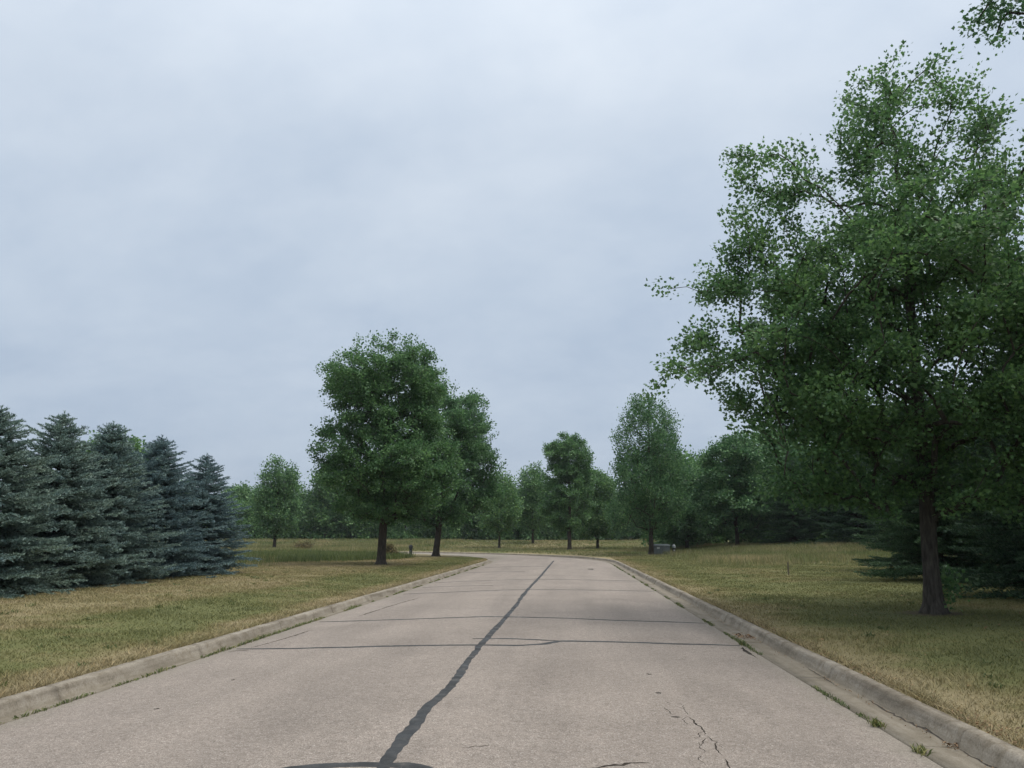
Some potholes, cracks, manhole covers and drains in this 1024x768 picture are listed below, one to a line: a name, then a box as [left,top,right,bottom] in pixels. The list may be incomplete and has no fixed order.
crack [665,701,731,768]
